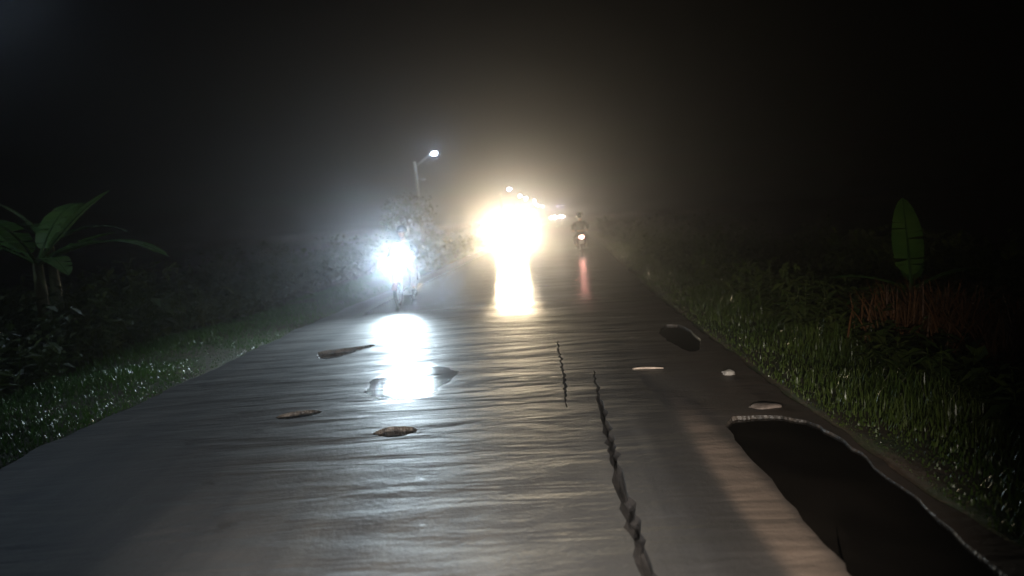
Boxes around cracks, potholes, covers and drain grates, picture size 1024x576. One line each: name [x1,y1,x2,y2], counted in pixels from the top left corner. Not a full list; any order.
crack [593,371,657,576]
pothole [276,410,321,419]
pothole [317,345,375,359]
pothole [725,415,1007,576]
pothole [373,426,417,437]
pothole [659,324,701,352]
crack [557,342,568,407]
